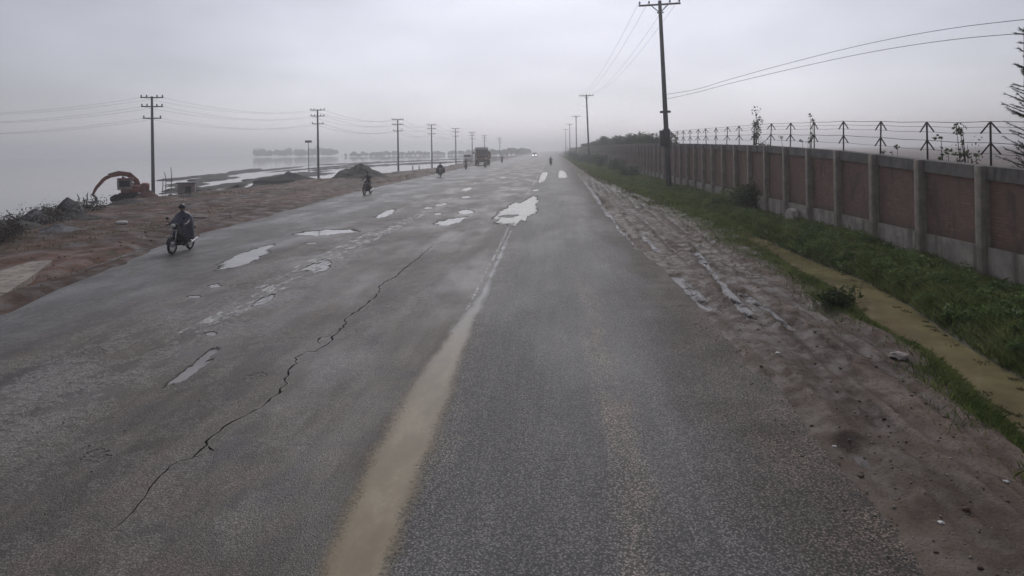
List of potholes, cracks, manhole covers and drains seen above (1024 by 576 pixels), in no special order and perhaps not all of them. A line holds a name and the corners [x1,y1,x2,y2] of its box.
crack [90,246,431,554]
pothole [212,243,276,272]
pothole [433,216,469,226]
pothole [491,195,540,228]
pothole [251,294,275,307]
pothole [161,346,221,389]
pothole [305,259,332,272]
